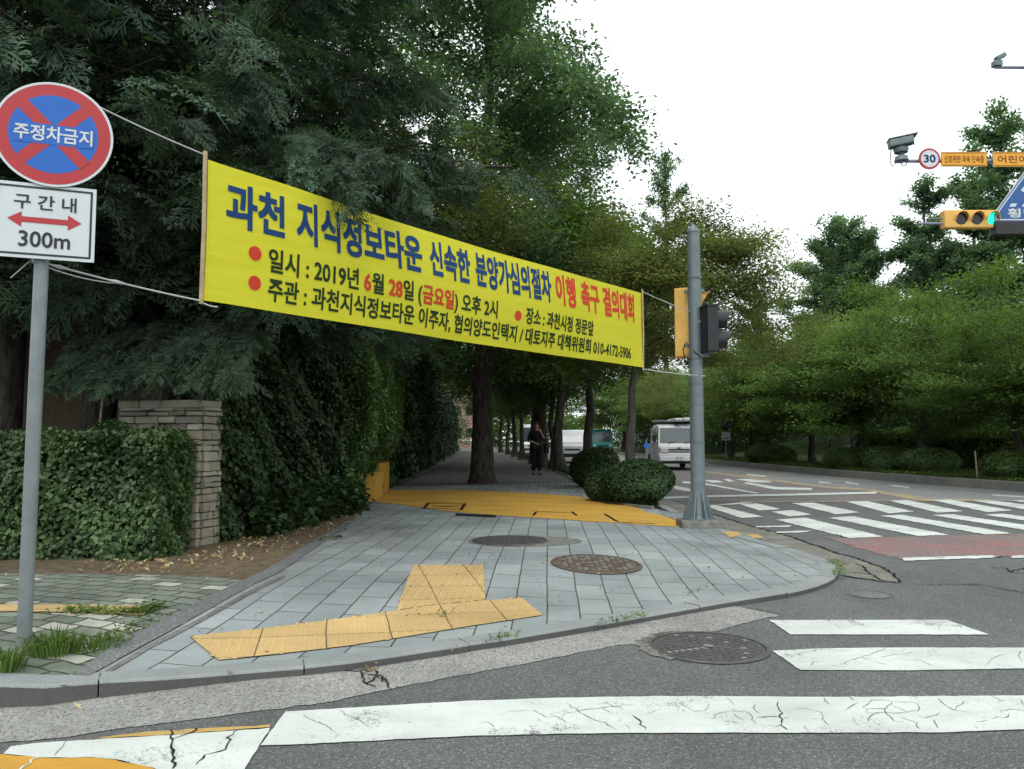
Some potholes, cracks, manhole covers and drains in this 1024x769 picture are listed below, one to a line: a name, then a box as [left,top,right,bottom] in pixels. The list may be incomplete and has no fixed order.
crack [196,730,237,764]
manhole cover [847,590,894,599]
crack [907,556,1024,596]
crack [845,697,1024,728]
crack [699,699,829,731]
manhole cover [472,535,548,545]
crack [346,668,391,689]
manhole cover [648,631,771,664]
manhole cover [551,554,643,574]
crack [483,701,656,729]
crack [170,727,197,768]
